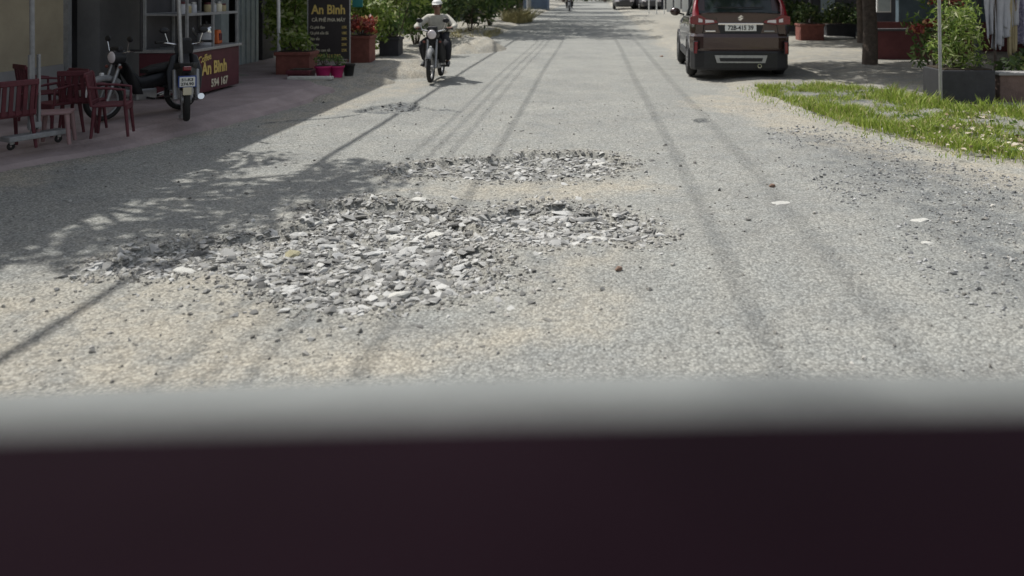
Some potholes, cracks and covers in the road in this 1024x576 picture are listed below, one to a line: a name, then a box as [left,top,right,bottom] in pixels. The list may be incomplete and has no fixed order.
pothole [475,201,667,249]
pothole [94,196,513,317]
pothole [351,102,427,114]
pothole [384,150,633,182]
